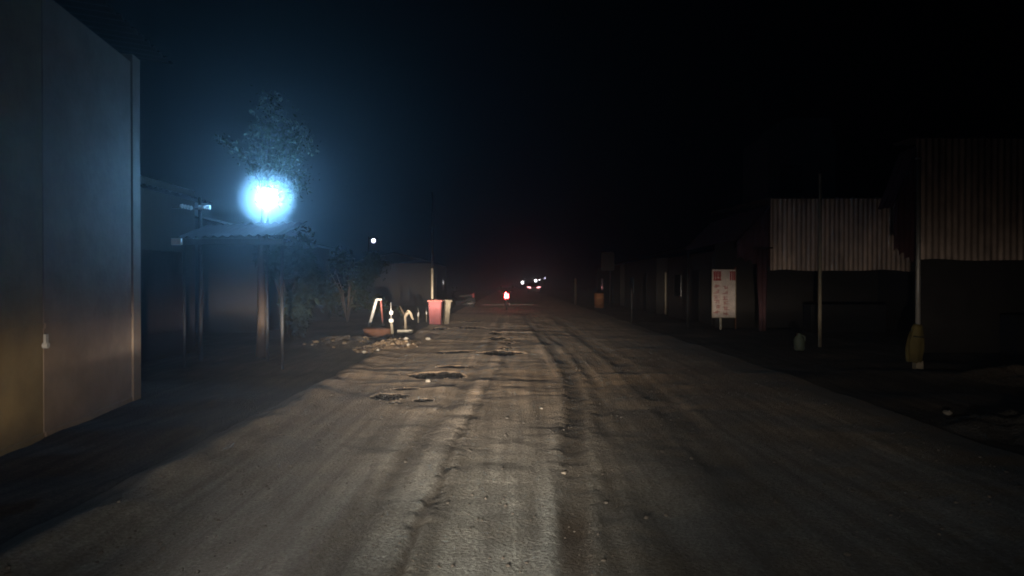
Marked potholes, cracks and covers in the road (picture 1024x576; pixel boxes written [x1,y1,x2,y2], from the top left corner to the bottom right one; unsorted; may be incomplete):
pothole [367,392,411,401]
pothole [399,370,468,379]
